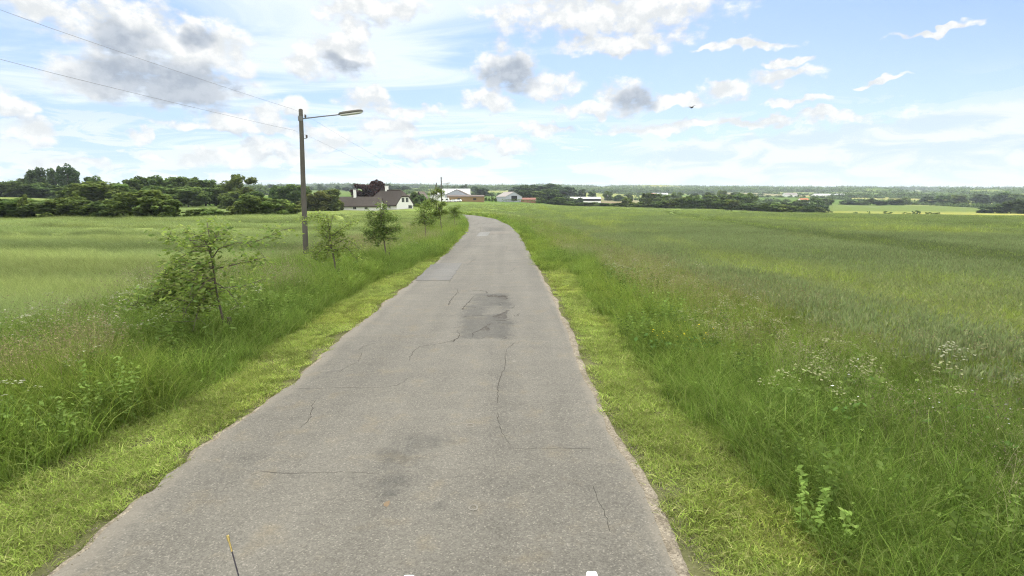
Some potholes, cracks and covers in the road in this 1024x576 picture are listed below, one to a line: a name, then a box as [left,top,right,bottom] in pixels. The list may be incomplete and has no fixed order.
crack [409,290,519,360]
crack [497,343,589,449]
